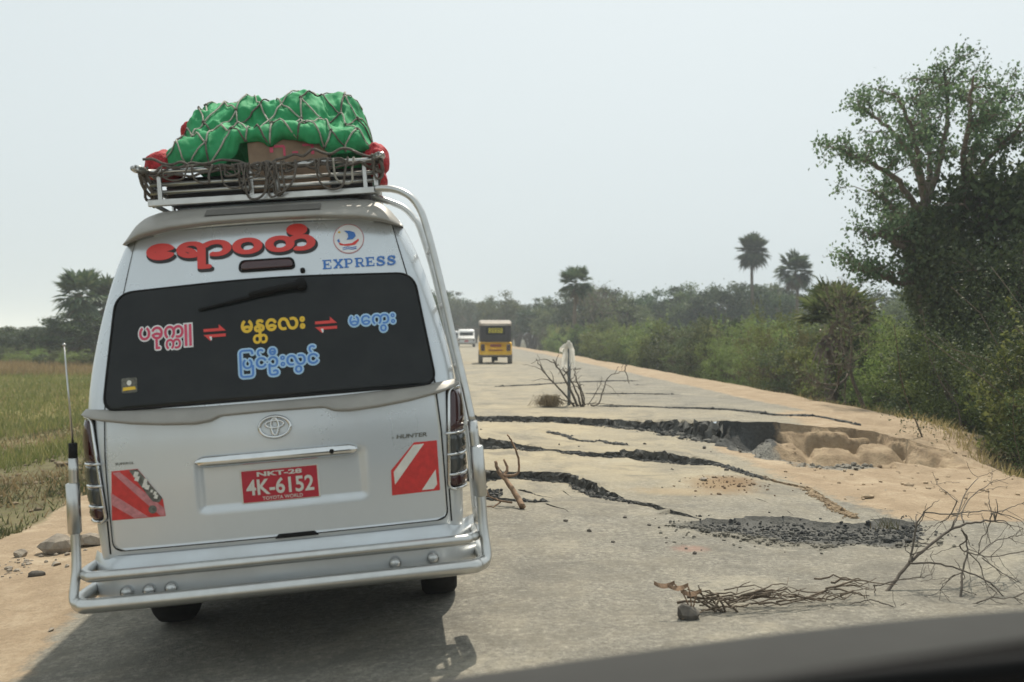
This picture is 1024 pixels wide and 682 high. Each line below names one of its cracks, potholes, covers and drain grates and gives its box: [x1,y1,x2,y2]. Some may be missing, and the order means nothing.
pothole [655,513,974,554]
pothole [710,420,976,471]
crack [465,380,861,519]
